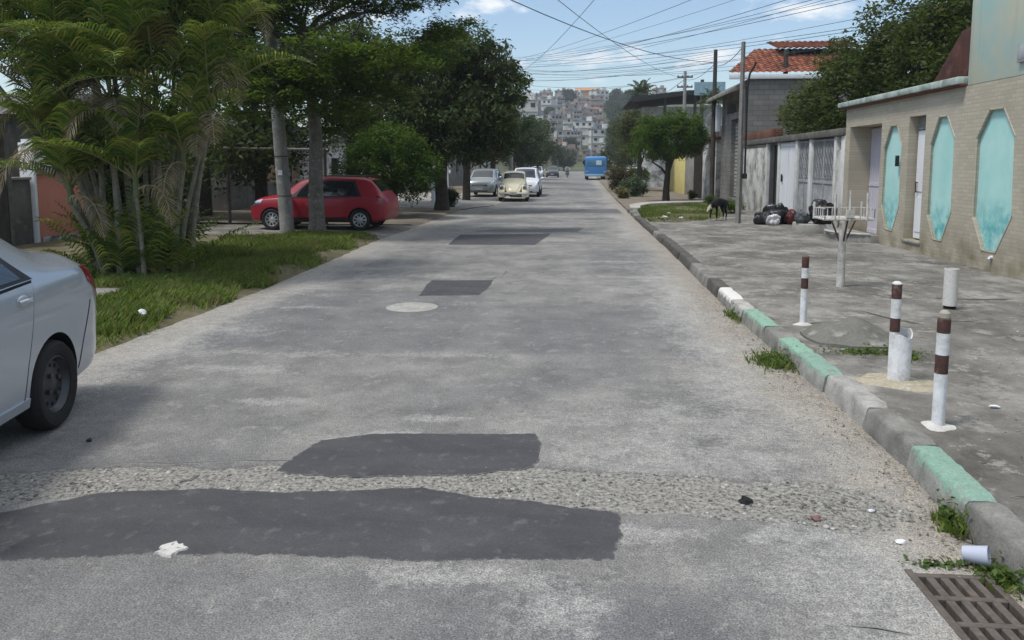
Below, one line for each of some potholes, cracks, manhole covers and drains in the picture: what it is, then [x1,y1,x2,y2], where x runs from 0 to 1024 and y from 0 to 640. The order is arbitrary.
manhole cover [386,302,438,312]
drain grate [904,569,1024,640]
